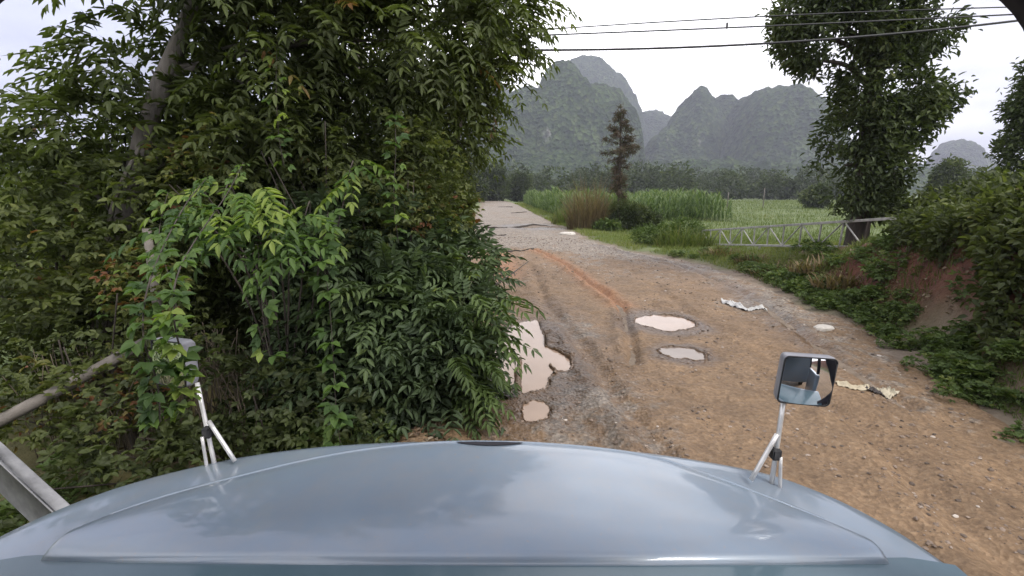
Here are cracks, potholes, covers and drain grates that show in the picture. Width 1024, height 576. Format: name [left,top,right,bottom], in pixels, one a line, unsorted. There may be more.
pothole [520,399,550,422]
pothole [491,320,574,395]
pothole [633,313,699,332]
pothole [656,345,708,361]
